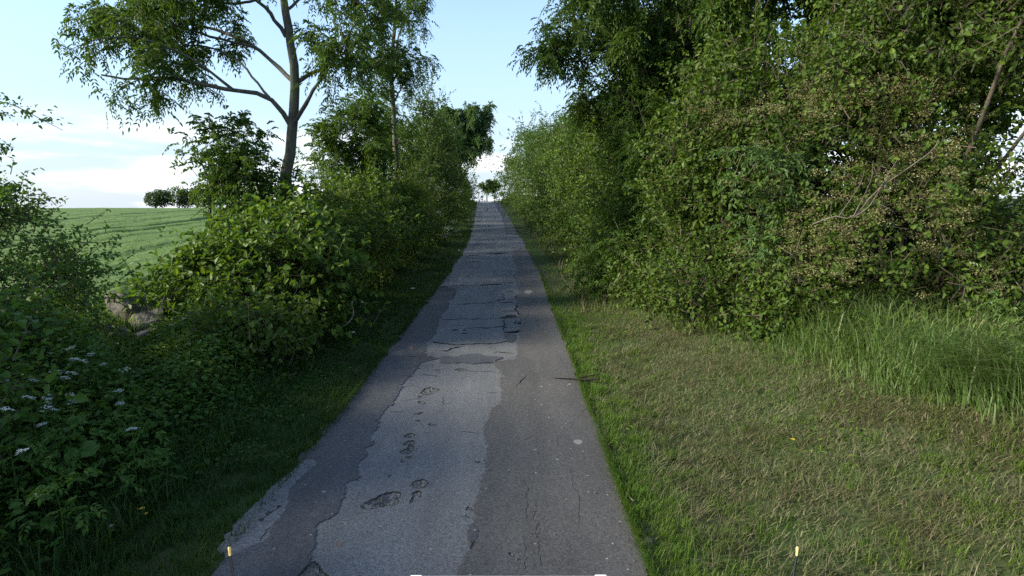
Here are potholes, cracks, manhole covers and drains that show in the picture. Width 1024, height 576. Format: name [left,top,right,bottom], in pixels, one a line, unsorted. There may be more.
crack [524,479,542,572]
pothole [411,479,429,489]
pothole [360,491,402,510]
